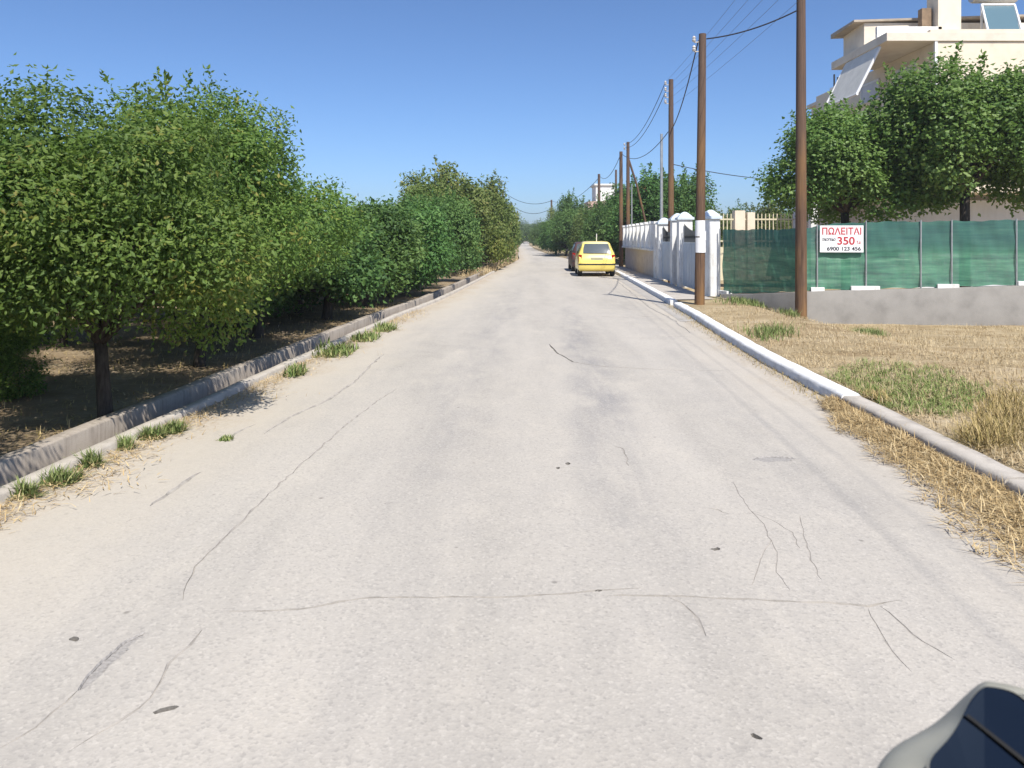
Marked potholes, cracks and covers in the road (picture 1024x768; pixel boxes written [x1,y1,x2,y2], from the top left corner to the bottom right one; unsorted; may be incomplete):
crack [150,355,953,672]
crack [2,630,202,751]
crack [549,344,711,371]
